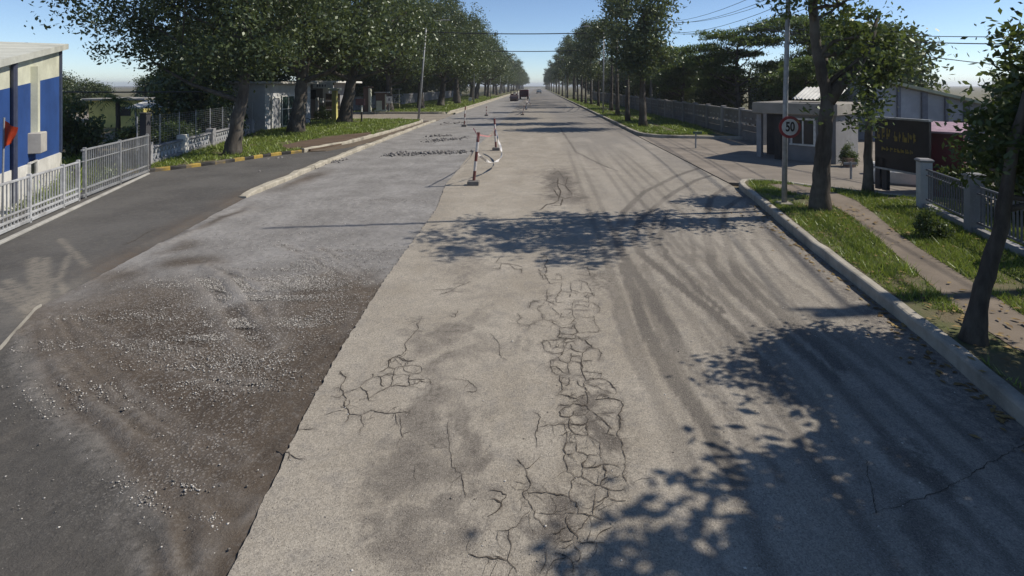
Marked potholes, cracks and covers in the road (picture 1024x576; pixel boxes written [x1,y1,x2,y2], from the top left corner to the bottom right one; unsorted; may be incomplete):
crack [328,317,466,496]
crack [865,444,1024,513]
crack [540,172,574,210]
crack [466,254,647,576]
